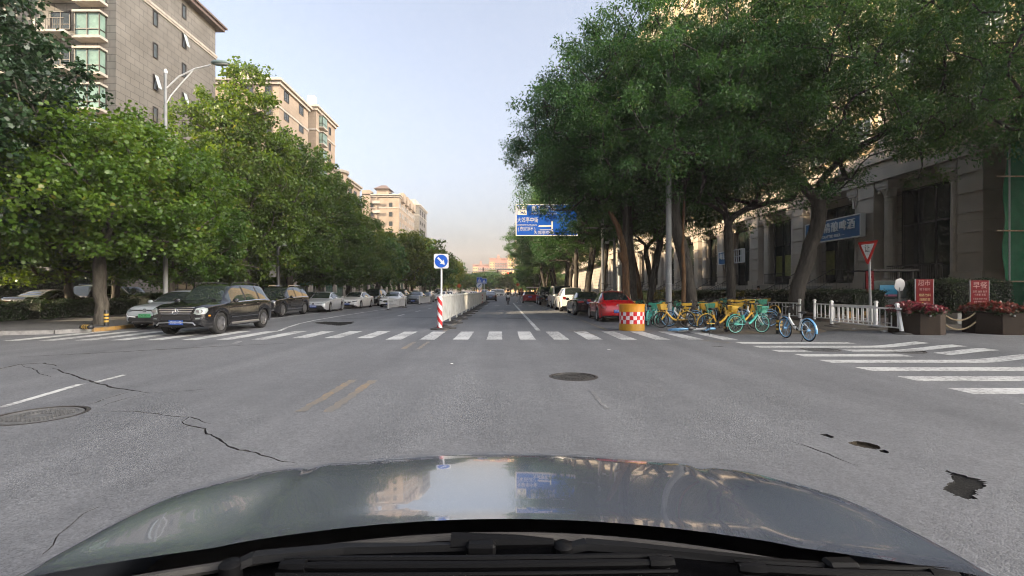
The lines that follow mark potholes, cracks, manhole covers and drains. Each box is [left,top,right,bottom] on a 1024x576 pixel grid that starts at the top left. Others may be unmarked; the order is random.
crack [0,343,294,463]
pothole [848,441,880,450]
crack [43,507,98,554]
manhole cover [549,372,598,381]
pothole [943,470,987,500]
manhole cover [0,405,91,426]
